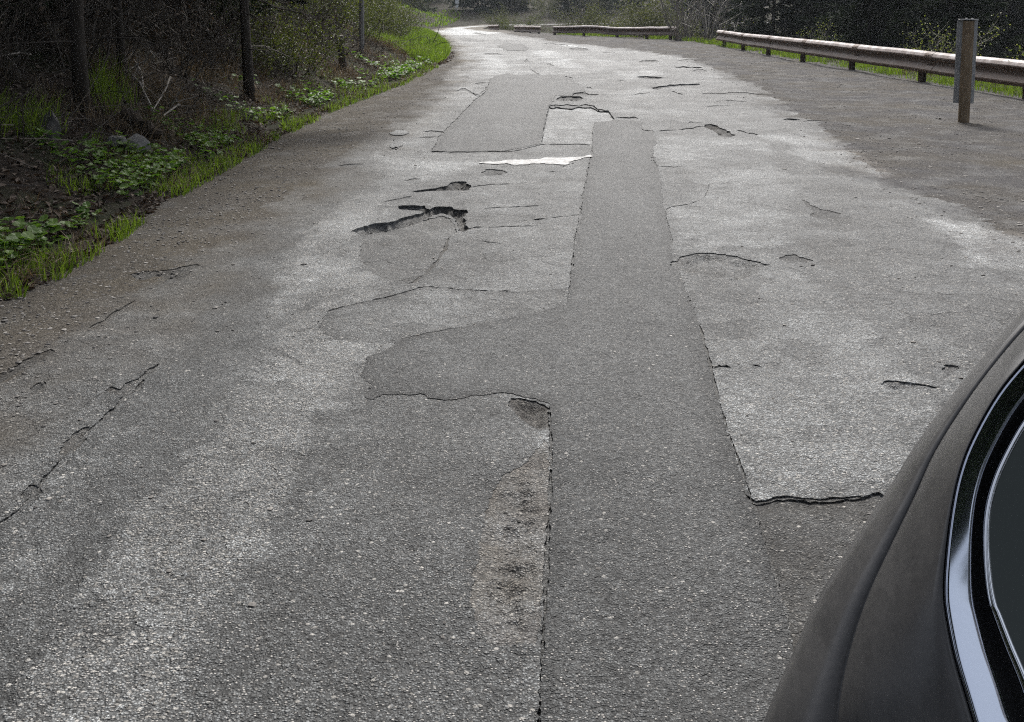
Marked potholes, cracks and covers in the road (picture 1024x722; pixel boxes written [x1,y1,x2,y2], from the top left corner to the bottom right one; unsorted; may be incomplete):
crack [549,88,637,119]
crack [317,236,477,324]
crack [747,497,860,506]
pothole [705,125,734,137]
crack [3,366,158,522]
pothole [509,399,549,430]
pothole [418,182,471,192]
pothole [355,208,468,235]
